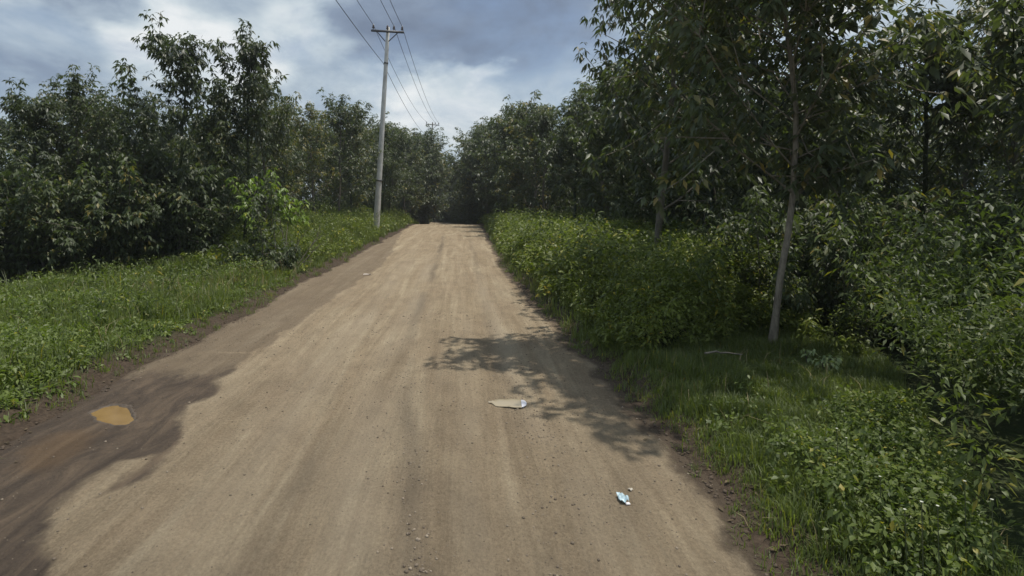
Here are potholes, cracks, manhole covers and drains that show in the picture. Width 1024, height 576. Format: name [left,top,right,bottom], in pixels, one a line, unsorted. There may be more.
pothole [87,403,138,426]
